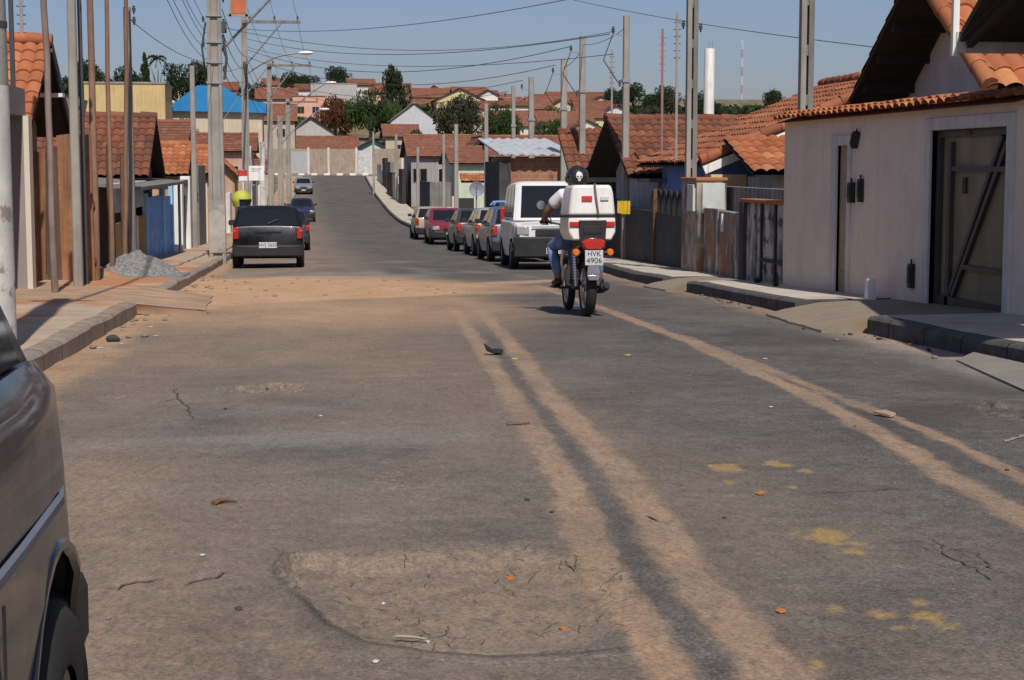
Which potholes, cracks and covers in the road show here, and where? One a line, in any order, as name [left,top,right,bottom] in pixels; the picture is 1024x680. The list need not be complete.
crack [910,537,1008,580]
pothole [256,536,682,664]
crack [92,578,160,589]
